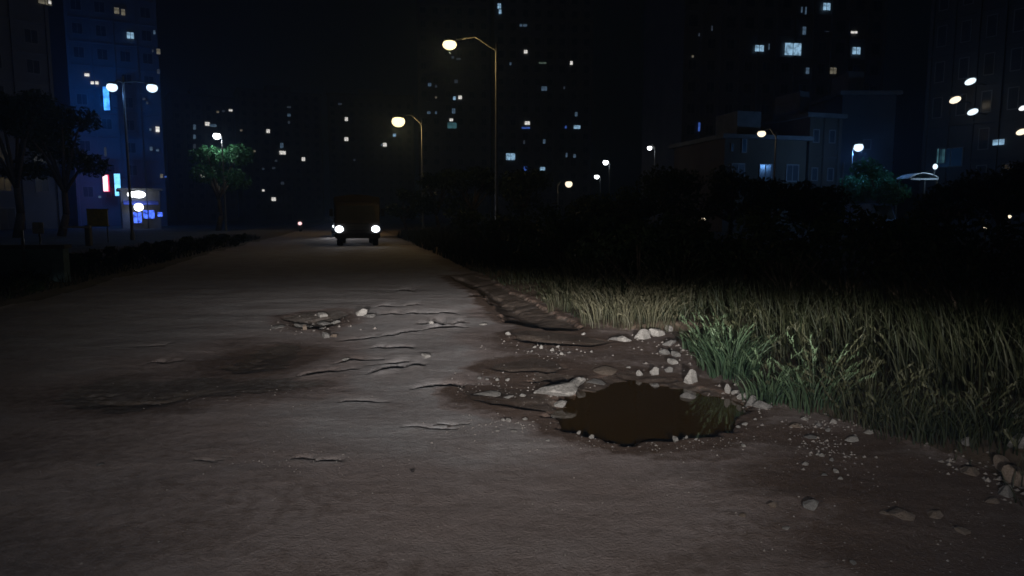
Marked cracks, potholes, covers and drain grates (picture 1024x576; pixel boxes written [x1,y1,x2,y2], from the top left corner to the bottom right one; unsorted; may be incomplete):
crack [399,422,472,432]
crack [290,456,346,464]
pothole [490,358,564,374]
crack [296,290,510,397]
pothole [531,371,750,432]
pothole [283,310,347,329]
